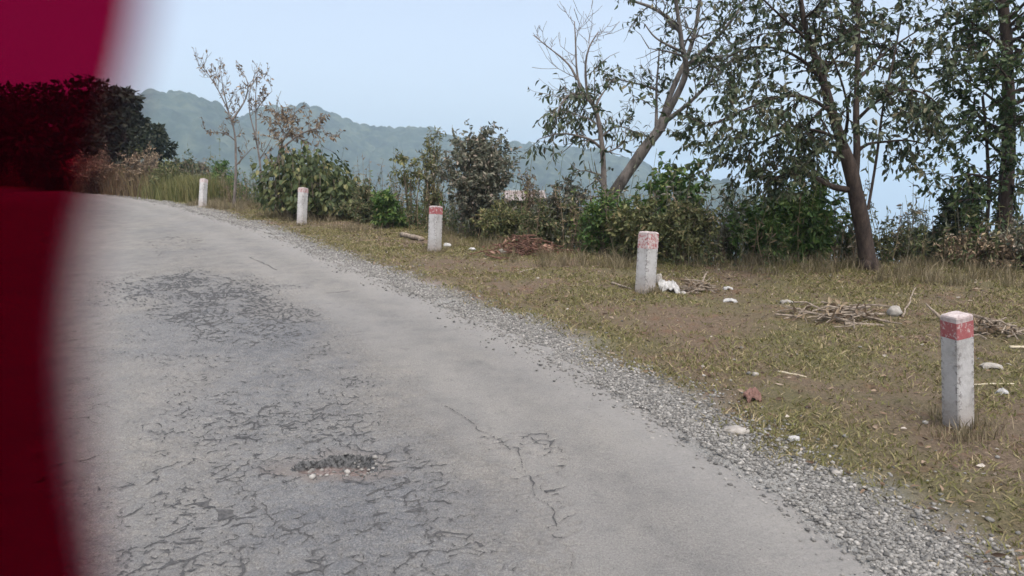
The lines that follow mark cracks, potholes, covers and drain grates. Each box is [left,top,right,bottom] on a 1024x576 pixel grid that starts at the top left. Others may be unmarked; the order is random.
pothole [290,452,387,479]
crack [88,236,333,349]
crack [446,406,578,568]
crack [75,331,132,463]
crack [87,323,524,576]
